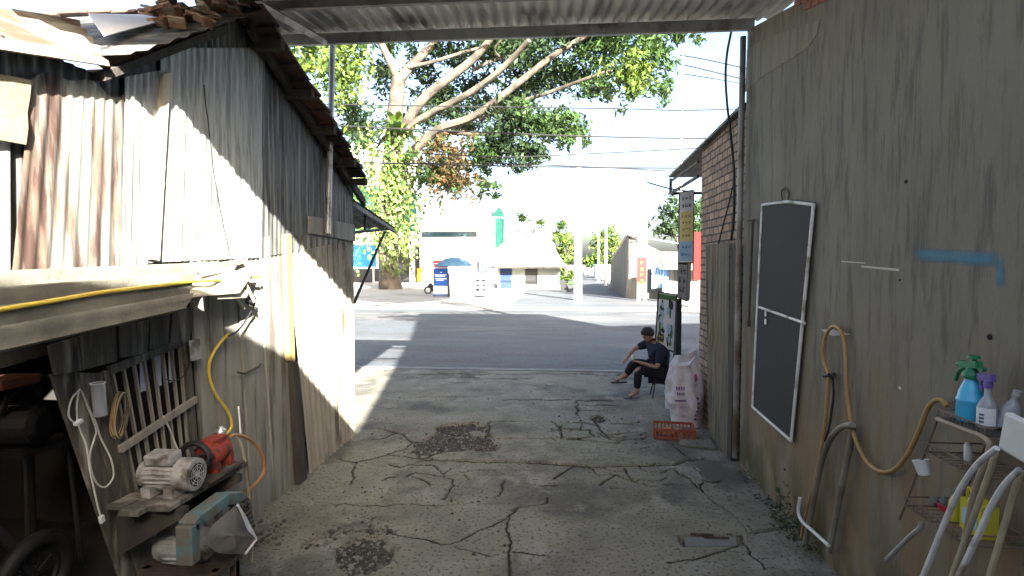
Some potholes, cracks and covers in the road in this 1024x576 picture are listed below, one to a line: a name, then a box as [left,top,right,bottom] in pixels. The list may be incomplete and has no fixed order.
pothole [411,423,500,460]
pothole [336,538,394,576]
crack [315,421,787,574]
